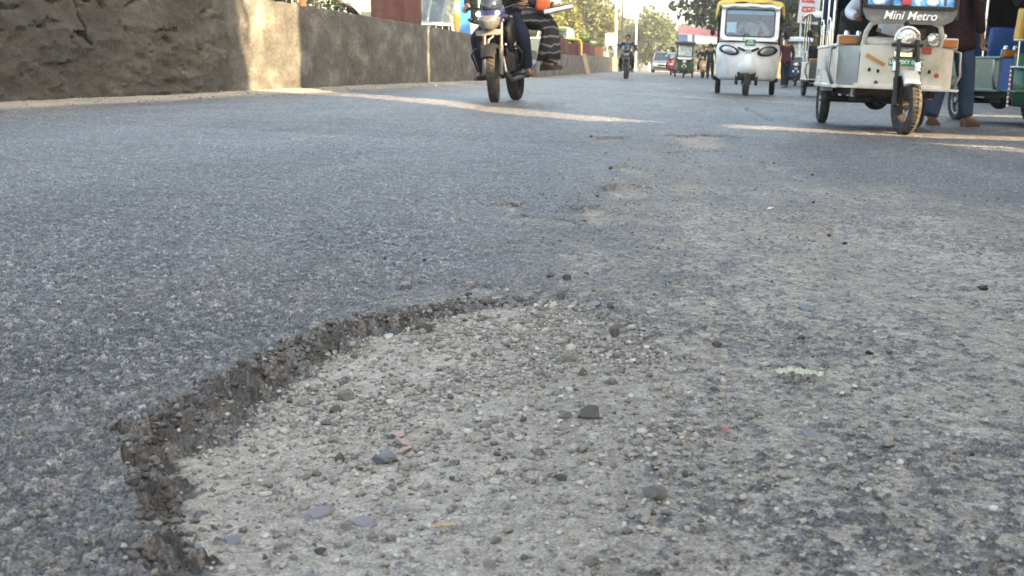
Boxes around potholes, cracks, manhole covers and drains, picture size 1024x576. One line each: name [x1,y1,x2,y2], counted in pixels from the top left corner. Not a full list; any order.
pothole [560,204,628,228]
pothole [654,134,755,150]
pothole [491,202,528,216]
pothole [586,183,667,201]
pothole [110,296,686,576]
